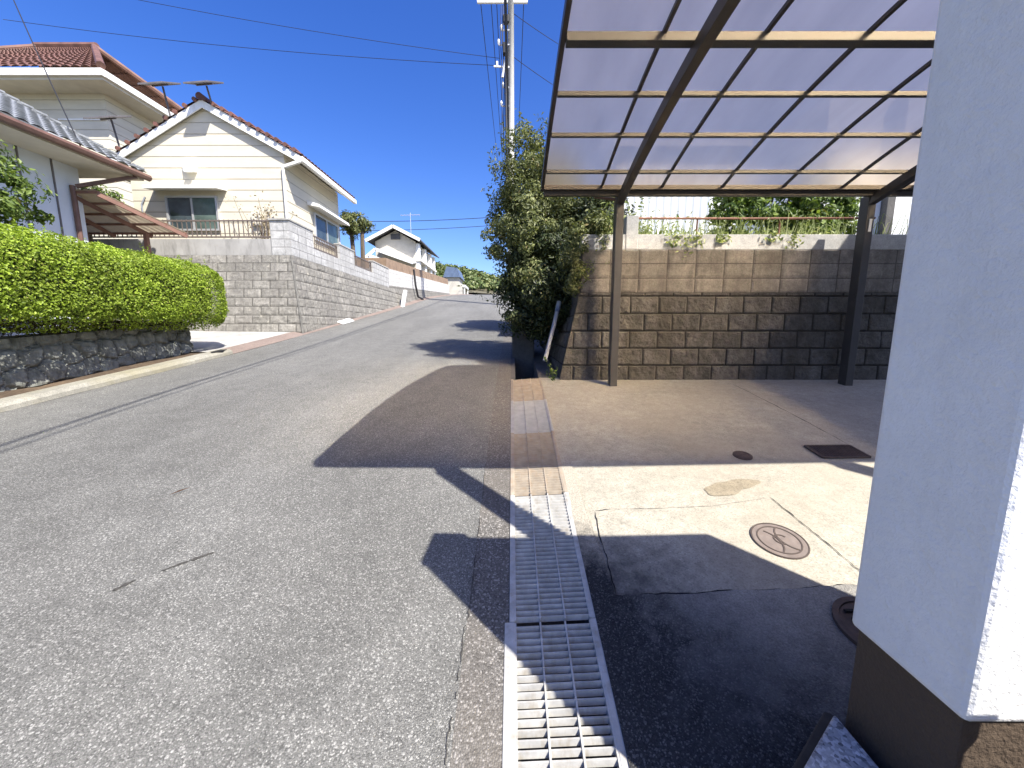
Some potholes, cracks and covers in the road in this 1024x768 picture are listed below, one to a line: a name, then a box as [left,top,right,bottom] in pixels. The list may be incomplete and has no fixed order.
manhole cover [750,523,810,559]
drain grate [502,618,629,768]
manhole cover [733,451,753,460]
crack [112,552,214,591]
drain grate [509,492,596,625]
